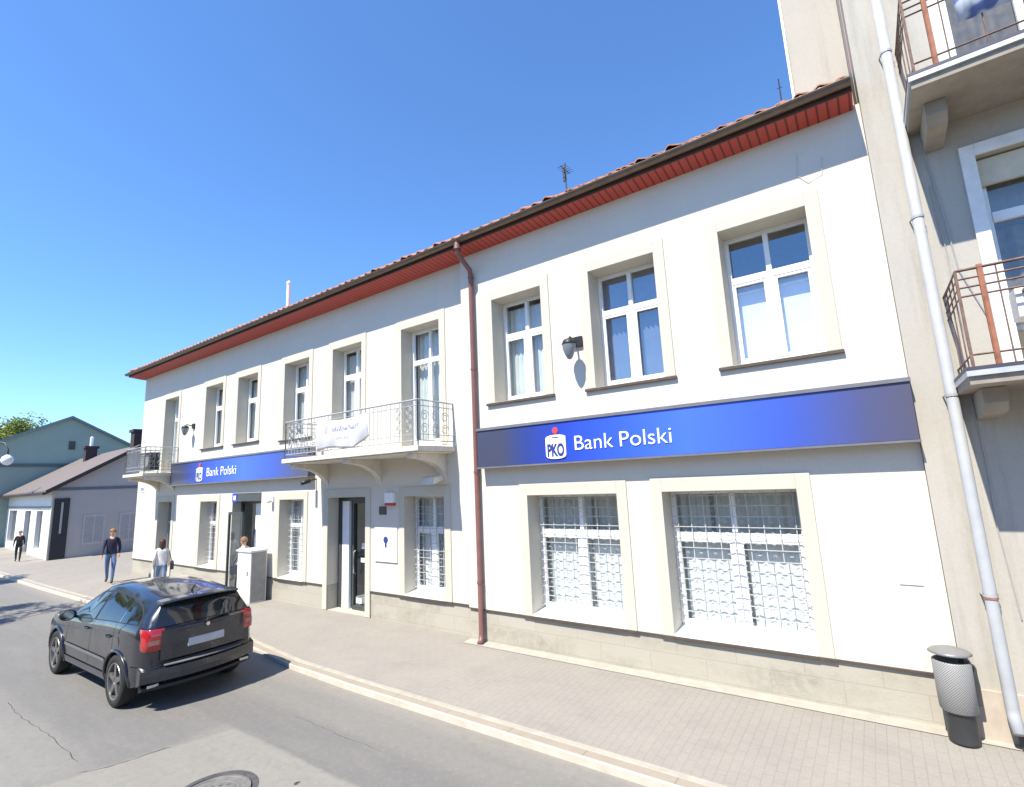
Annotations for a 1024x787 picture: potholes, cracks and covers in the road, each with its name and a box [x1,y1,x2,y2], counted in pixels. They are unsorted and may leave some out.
manhole cover [185,770,259,787]
crack [8,702,170,773]
